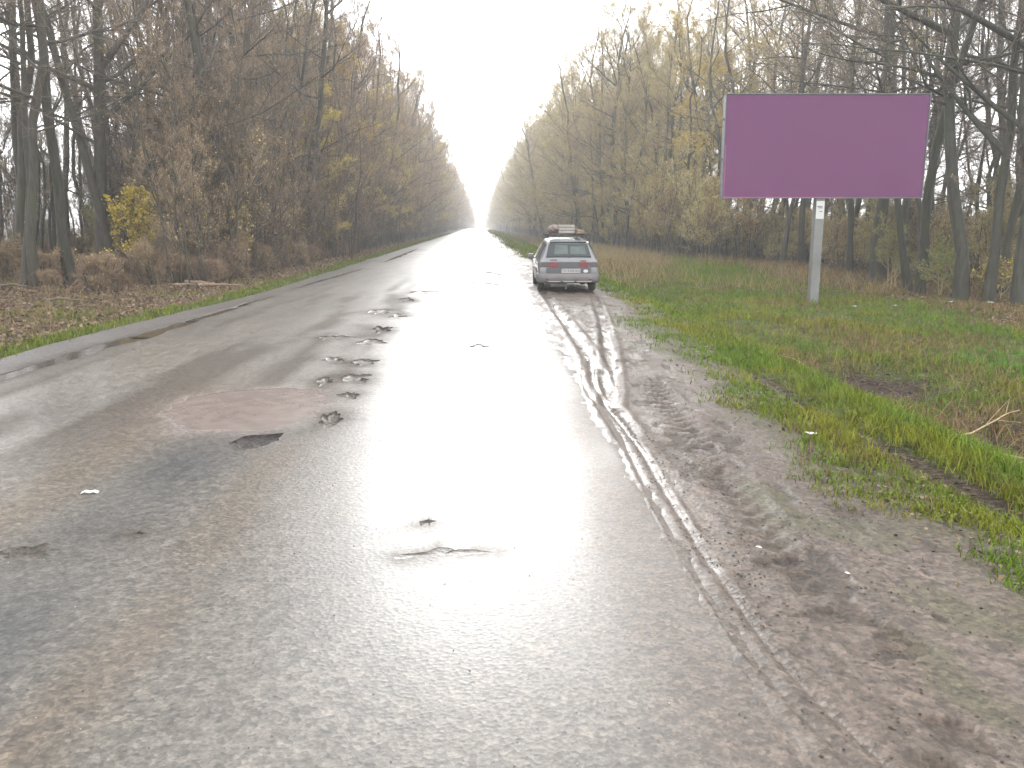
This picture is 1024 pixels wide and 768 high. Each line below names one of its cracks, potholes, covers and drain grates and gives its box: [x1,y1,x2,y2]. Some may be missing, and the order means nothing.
pothole [229,433,284,451]
pothole [319,411,343,429]
pothole [0,542,55,559]
pothole [338,374,372,383]
